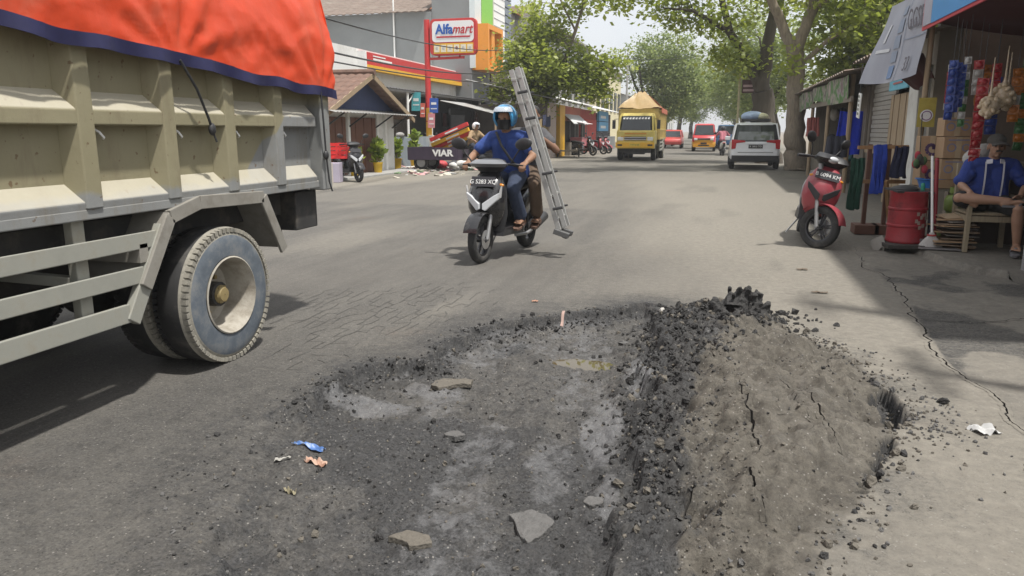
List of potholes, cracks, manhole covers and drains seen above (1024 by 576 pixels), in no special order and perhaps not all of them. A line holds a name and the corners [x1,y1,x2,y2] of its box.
pothole [179,302,673,576]
crack [734,371,846,522]
